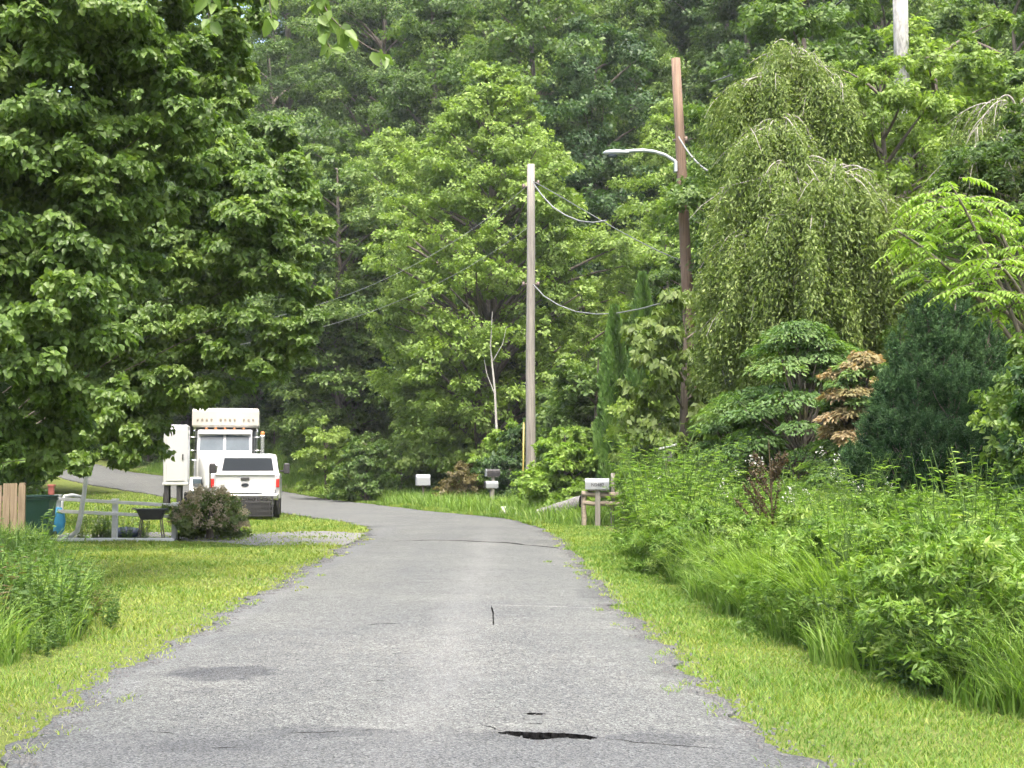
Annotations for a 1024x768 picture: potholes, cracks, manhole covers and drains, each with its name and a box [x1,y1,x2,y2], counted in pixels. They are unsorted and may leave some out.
crack [411,540,556,548]
crack [604,738,717,749]
